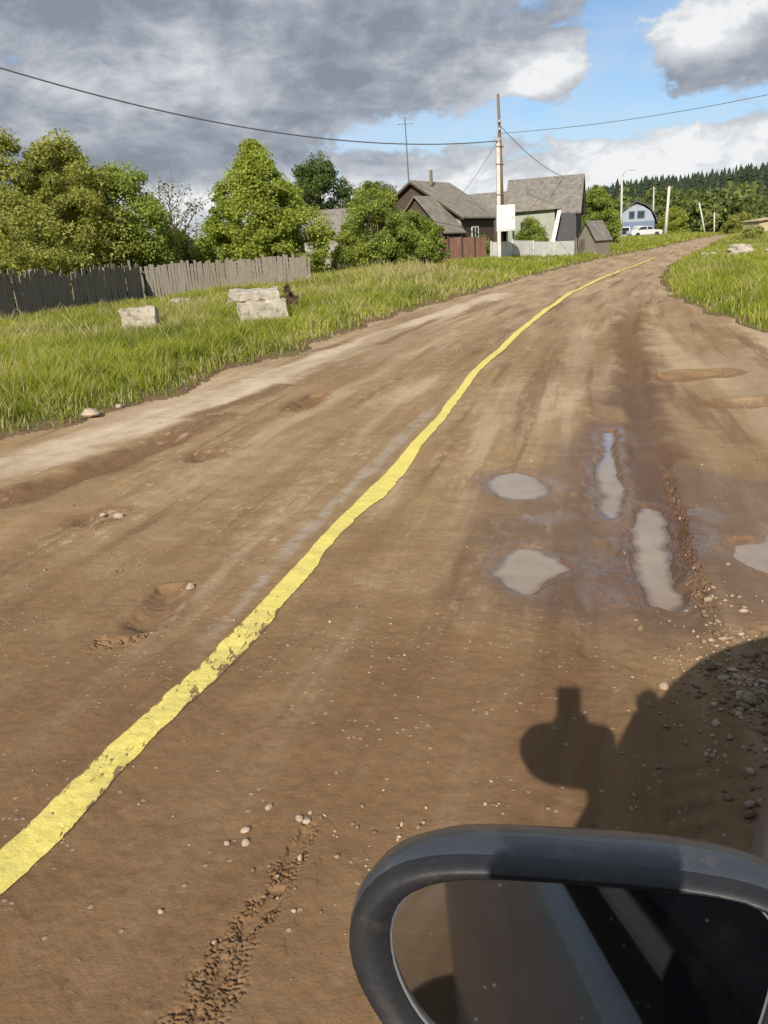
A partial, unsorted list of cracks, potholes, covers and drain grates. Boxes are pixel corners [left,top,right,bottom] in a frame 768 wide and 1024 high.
pothole [696,396,768,411]
pothole [470,539,583,604]
pothole [608,498,690,621]
pothole [703,519,768,581]
pothole [469,467,568,506]
pothole [173,444,241,466]
pothole [98,577,206,637]
pothole [274,391,337,413]
pothole [580,425,644,529]
pothole [51,505,144,533]
pothole [646,367,755,384]
